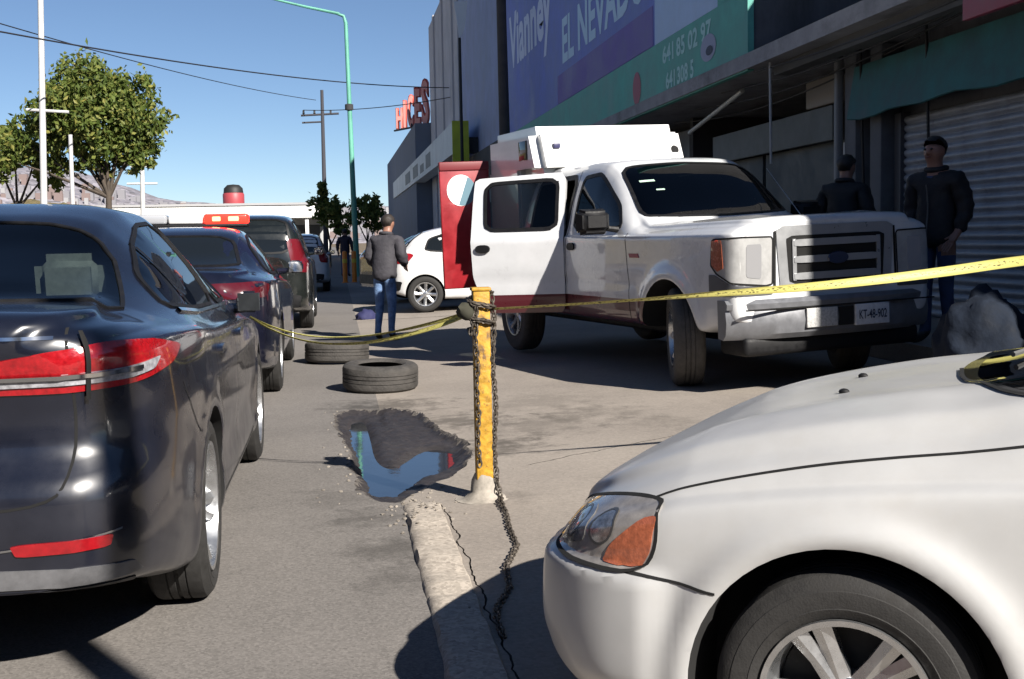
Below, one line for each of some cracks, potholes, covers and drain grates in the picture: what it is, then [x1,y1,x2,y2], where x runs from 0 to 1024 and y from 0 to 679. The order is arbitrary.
pothole [333,408,473,503]
crack [441,505,520,679]
crack [529,435,674,465]
